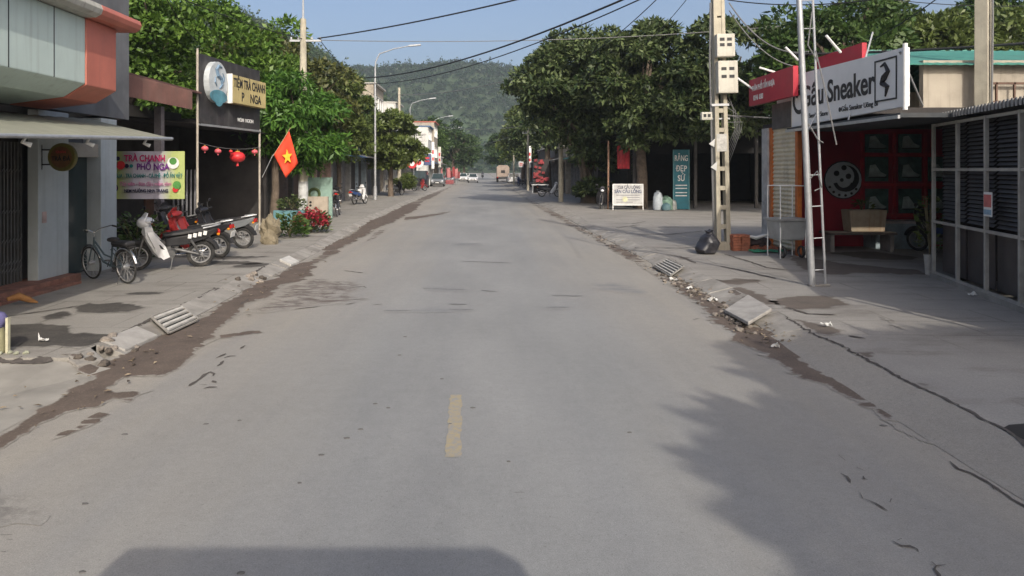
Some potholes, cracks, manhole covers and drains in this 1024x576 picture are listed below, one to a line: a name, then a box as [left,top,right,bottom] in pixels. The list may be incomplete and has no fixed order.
crack [188,345,245,388]
drain grate [150,305,199,334]
crack [950,461,1024,506]
drain grate [653,258,684,277]
crack [839,455,891,511]
crack [893,538,946,576]
